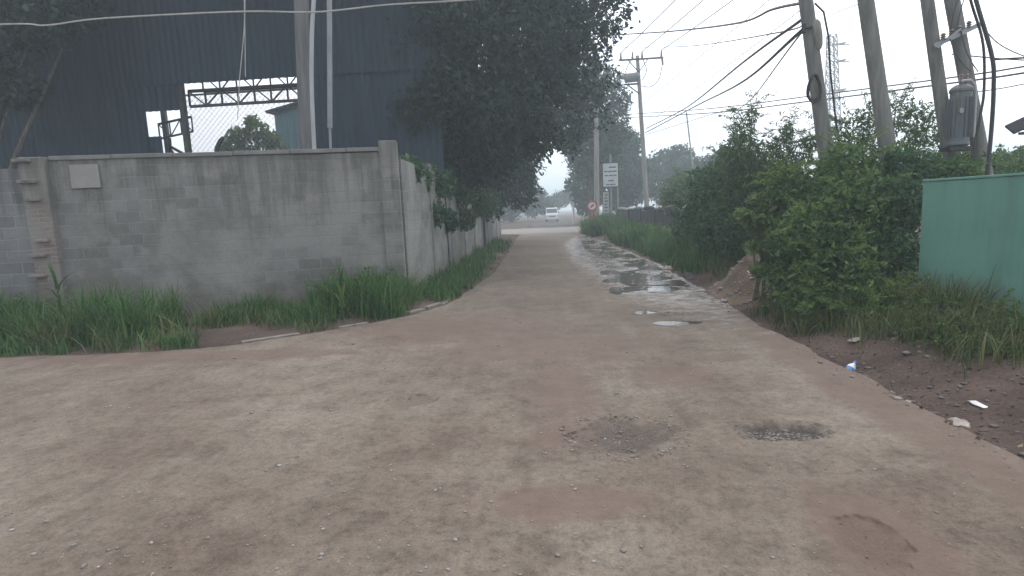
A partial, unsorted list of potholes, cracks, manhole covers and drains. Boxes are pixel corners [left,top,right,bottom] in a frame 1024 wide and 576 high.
pothole [826,512,920,576]
pothole [731,419,839,442]
pothole [557,413,690,462]
